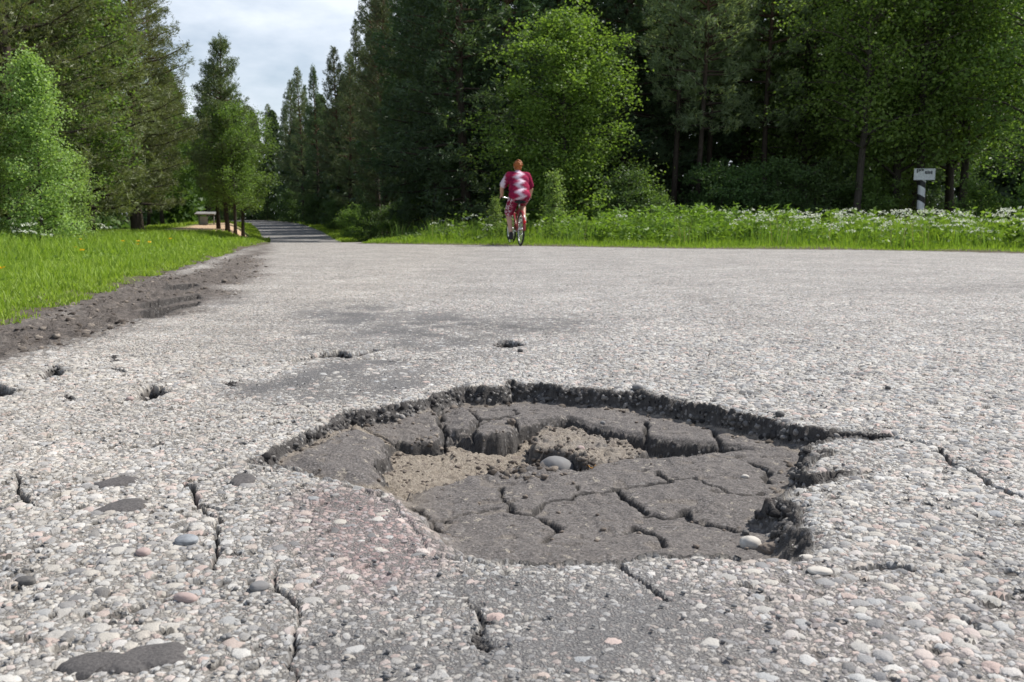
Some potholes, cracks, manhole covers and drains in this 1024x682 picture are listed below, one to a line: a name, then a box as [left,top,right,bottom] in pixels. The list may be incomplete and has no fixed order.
crack [463,599,502,653]
crack [182,482,233,571]
crack [270,565,303,682]
crack [11,473,37,507]
pothole [490,340,524,348]
crack [896,436,1023,498]
pothole [246,379,893,568]
pothole [120,384,178,401]
pothole [39,363,66,381]
